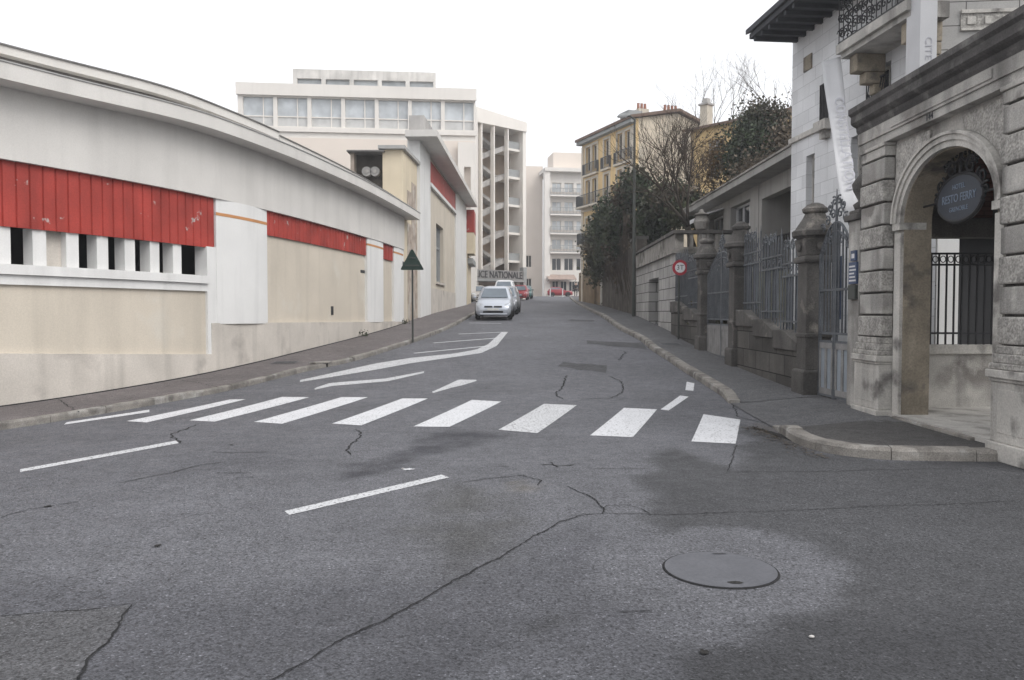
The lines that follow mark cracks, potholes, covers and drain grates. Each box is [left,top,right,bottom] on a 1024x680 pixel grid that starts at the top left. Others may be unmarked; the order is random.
crack [272,486,736,679]
manhole cover [662,552,780,590]
